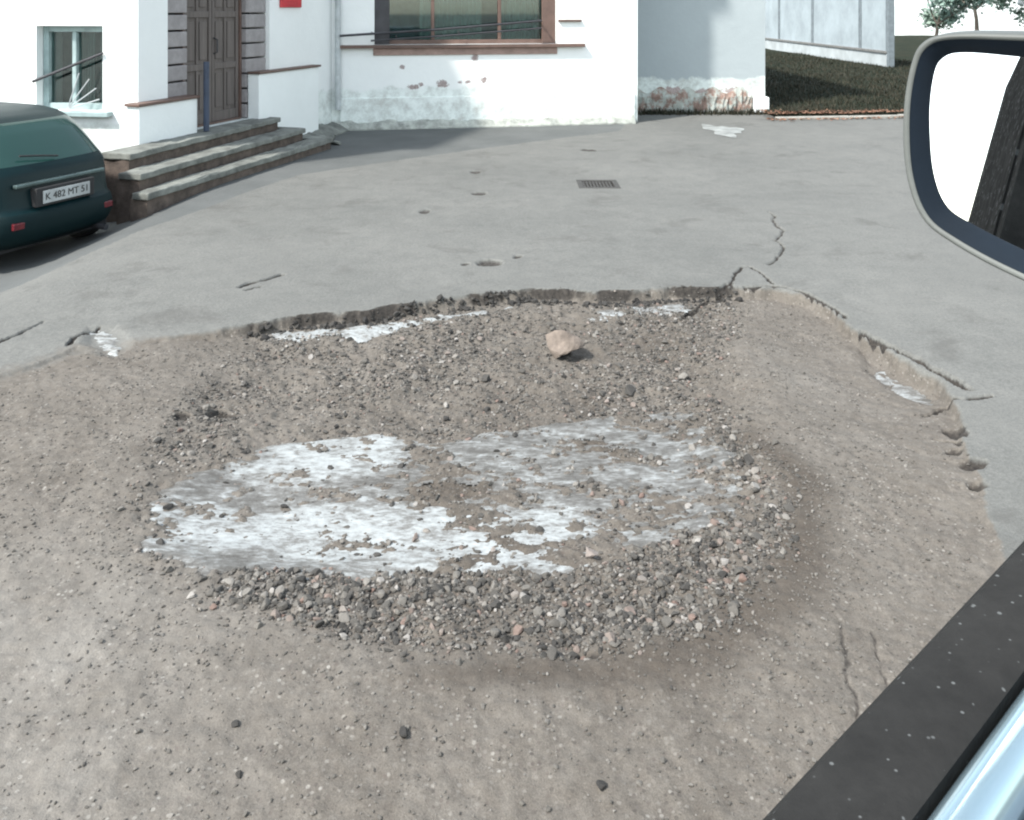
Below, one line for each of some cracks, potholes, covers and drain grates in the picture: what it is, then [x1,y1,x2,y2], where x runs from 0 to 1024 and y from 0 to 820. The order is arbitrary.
pothole [81,325,134,358]
crack [677,211,995,418]
crack [0,320,47,343]
pothole [111,287,810,673]
pothole [964,478,993,492]
pothole [940,445,968,456]
pothole [472,258,512,267]
pothole [954,455,993,472]
crack [236,273,287,291]
pothole [937,420,973,441]
